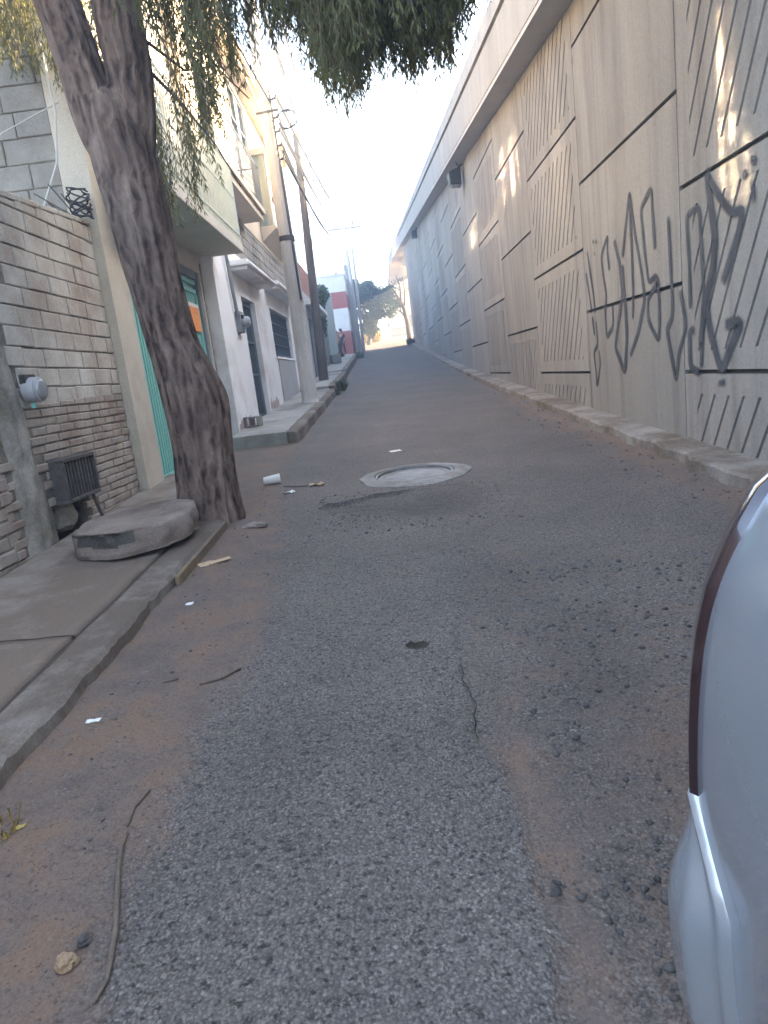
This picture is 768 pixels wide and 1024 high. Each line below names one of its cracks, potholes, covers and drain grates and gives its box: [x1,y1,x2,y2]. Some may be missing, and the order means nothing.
pothole [405,640,430,650]
manhole cover [360,462,472,488]
crack [461,666,479,740]
